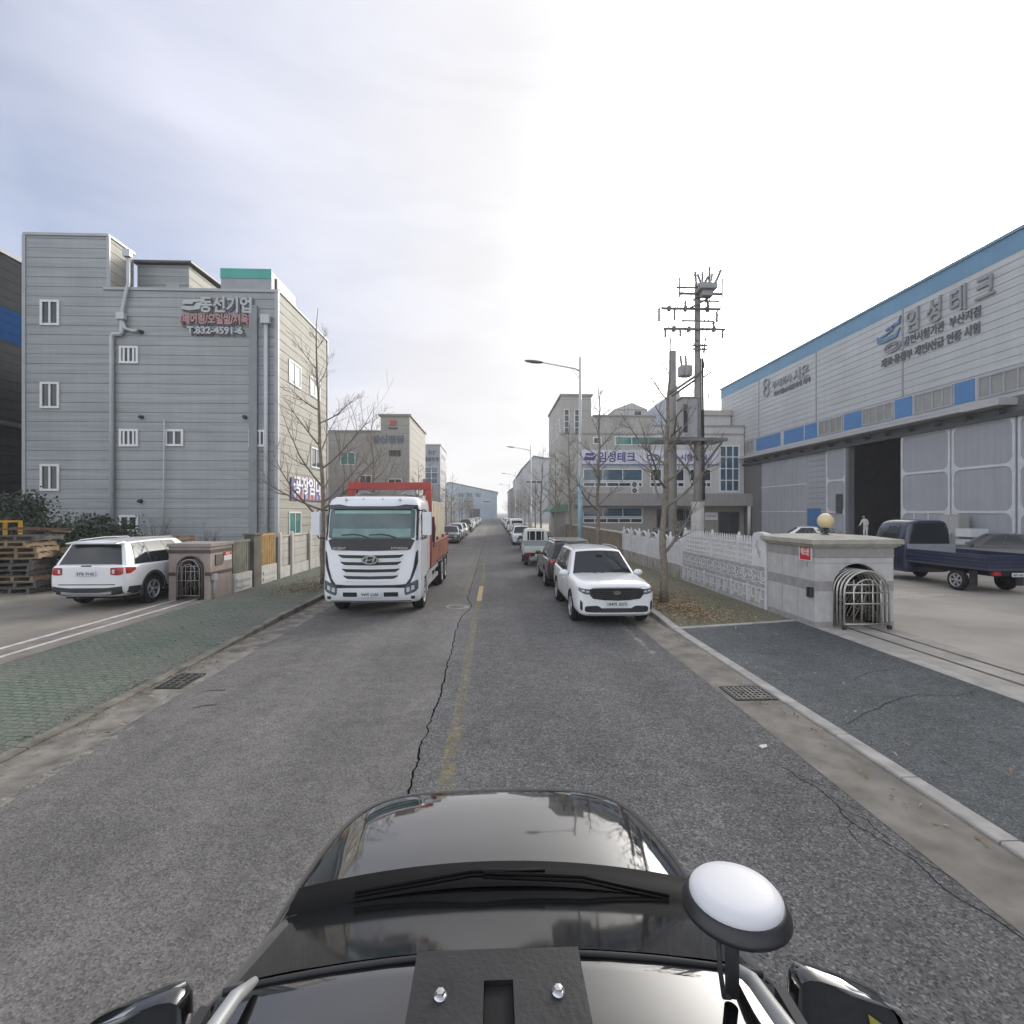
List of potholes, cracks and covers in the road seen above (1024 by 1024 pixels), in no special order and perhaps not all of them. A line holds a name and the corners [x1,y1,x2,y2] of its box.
drain grate [153,673,206,689]
crack [769,759,1024,940]
crack [407,527,489,794]
drain grate [719,686,778,701]
